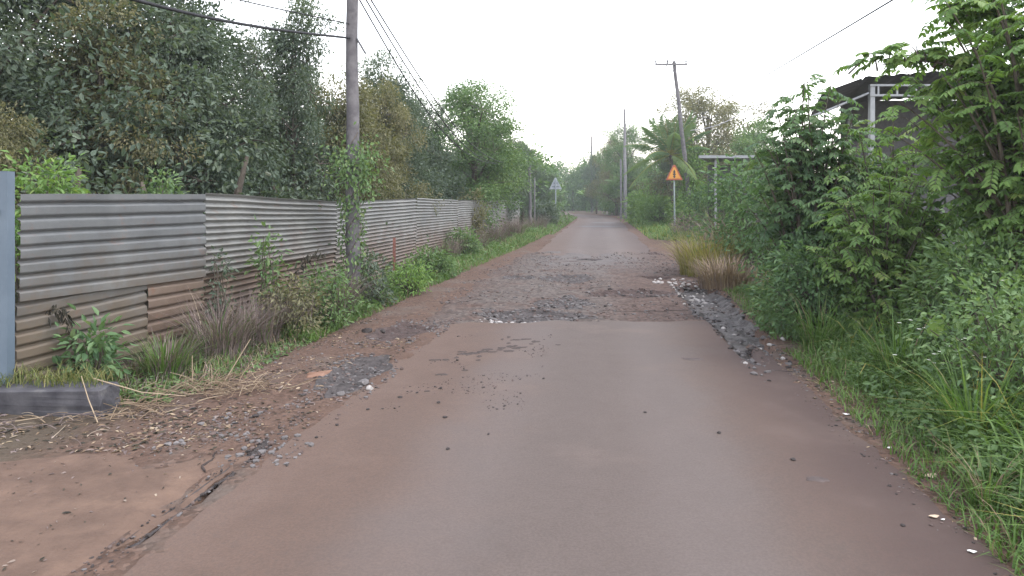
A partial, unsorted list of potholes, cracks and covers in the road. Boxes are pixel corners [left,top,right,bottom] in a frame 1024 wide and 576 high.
pothole [476,308,597,323]
pothole [541,274,593,284]
pothole [313,355,393,398]
pothole [533,296,594,310]
crack [201,451,217,473]
